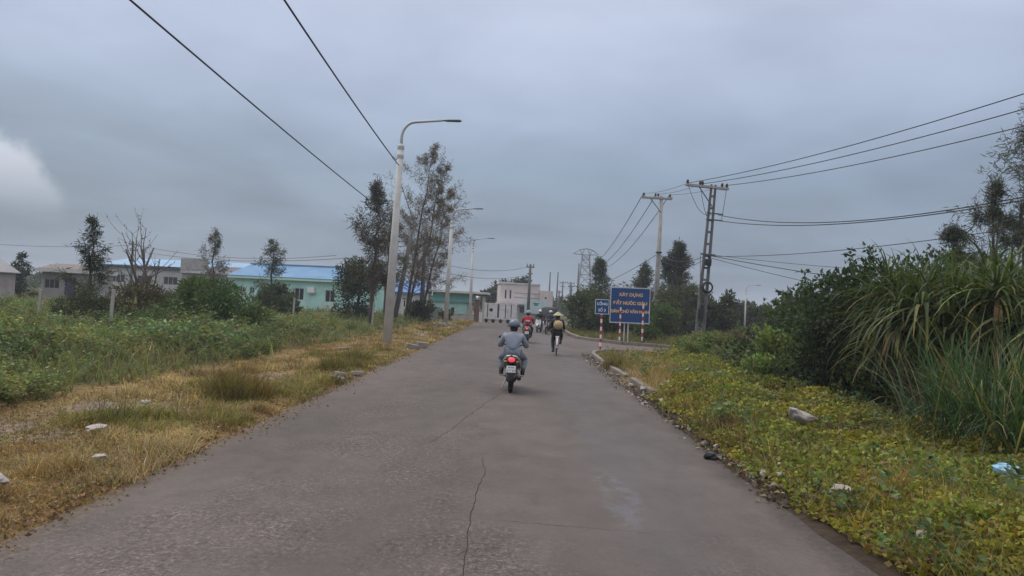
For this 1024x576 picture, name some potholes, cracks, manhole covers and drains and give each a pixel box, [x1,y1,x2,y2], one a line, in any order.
crack [420,392,650,576]
